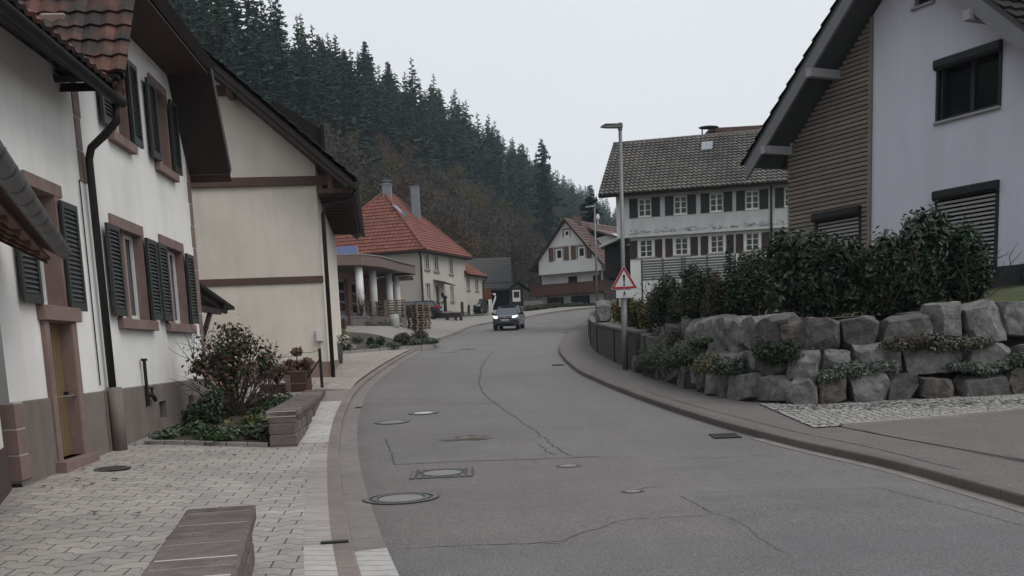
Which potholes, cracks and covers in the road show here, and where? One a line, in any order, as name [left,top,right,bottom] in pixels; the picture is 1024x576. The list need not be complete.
manhole cover [362,492,440,505]
crack [385,352,585,465]
manhole cover [409,467,474,479]
crack [409,488,1022,553]
